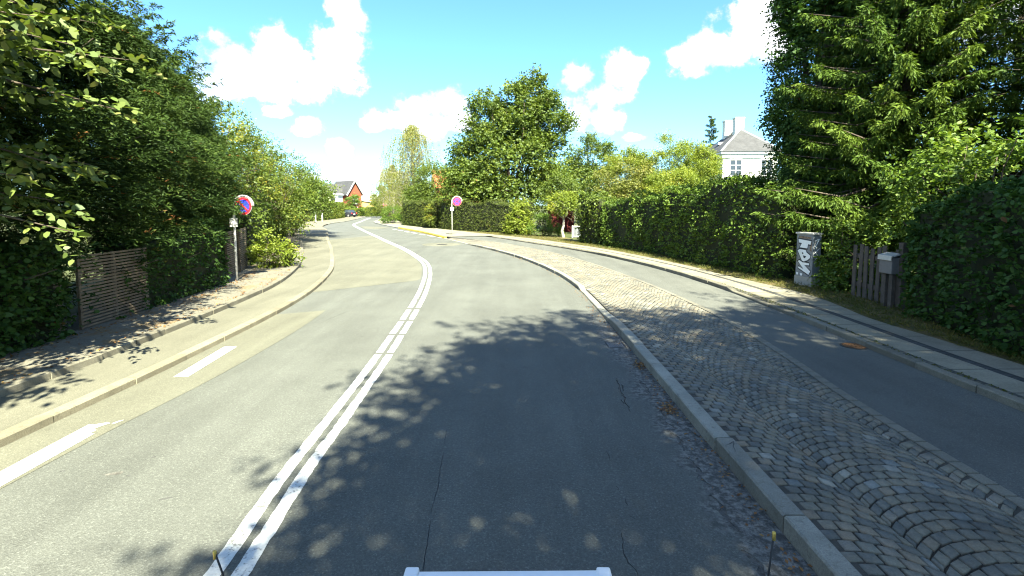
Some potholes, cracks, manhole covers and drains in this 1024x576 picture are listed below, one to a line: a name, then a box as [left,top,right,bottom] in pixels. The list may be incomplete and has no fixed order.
crack [422,431,447,572]
crack [616,378,630,411]
crack [590,420,638,576]
